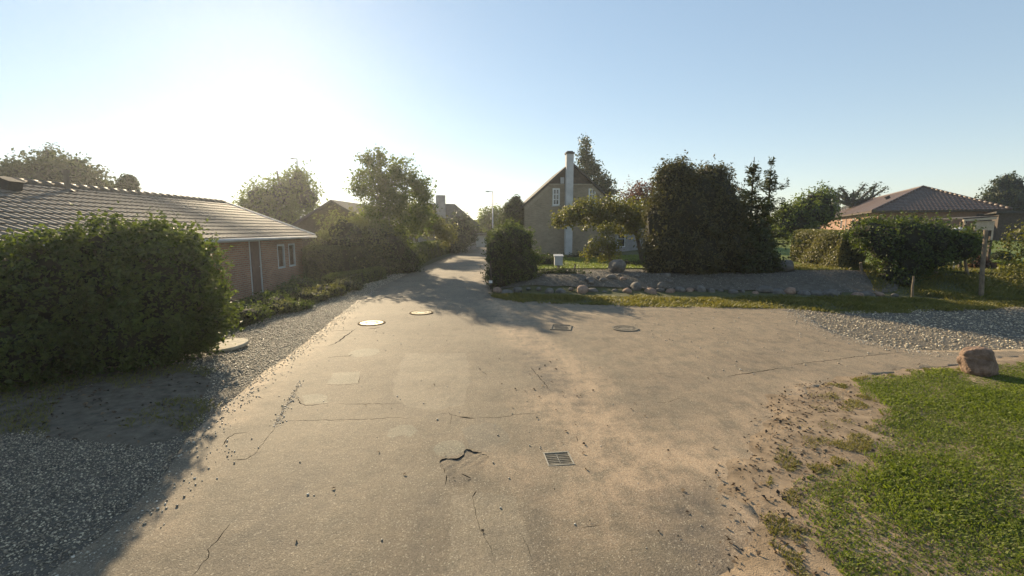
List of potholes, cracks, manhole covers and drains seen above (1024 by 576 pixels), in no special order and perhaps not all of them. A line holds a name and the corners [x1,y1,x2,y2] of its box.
drain grate [543,451,575,466]
pothole [439,449,489,488]
